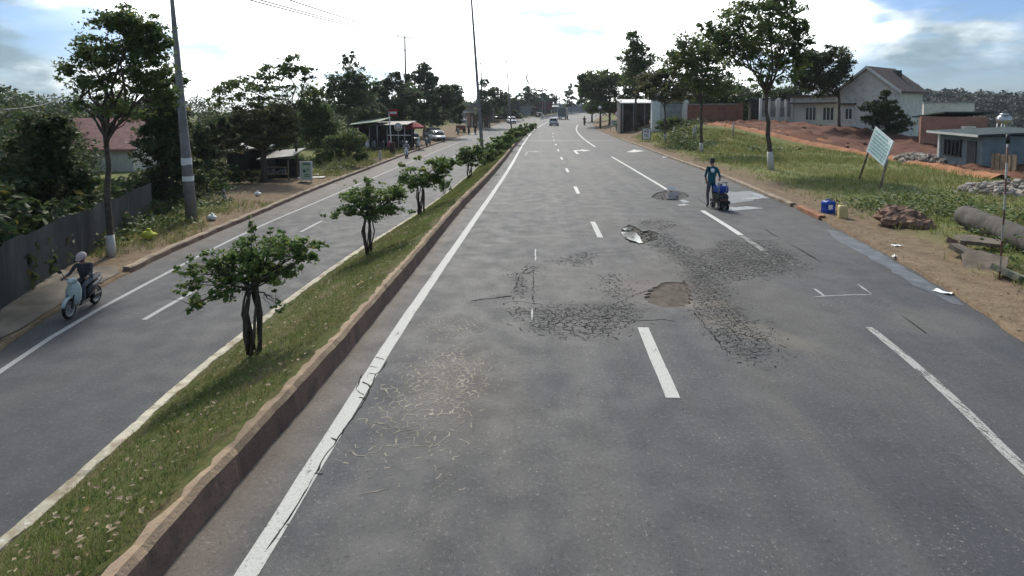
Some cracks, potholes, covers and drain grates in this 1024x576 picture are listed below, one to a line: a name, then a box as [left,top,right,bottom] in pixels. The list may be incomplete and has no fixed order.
pothole [621,225,659,244]
crack [266,308,505,550]
crack [474,246,674,341]
pothole [651,191,689,200]
crack [620,218,813,371]
